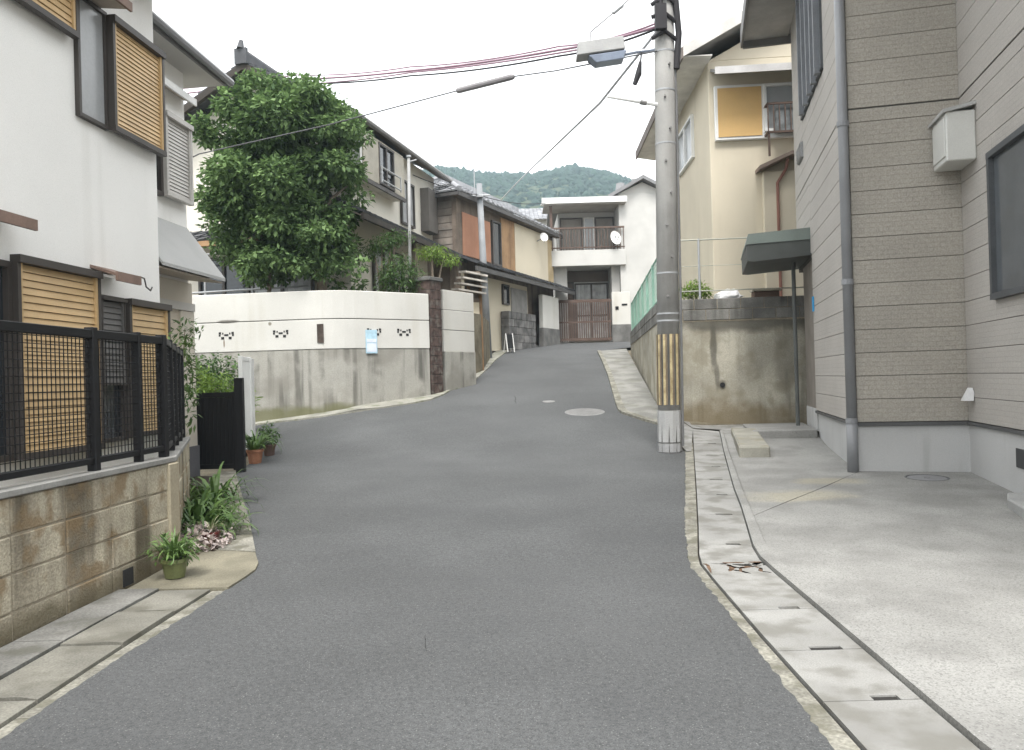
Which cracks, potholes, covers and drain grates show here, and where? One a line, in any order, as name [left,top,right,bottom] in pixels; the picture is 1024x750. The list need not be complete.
manhole cover [565,408,605,416]
crack [704,561,763,573]
